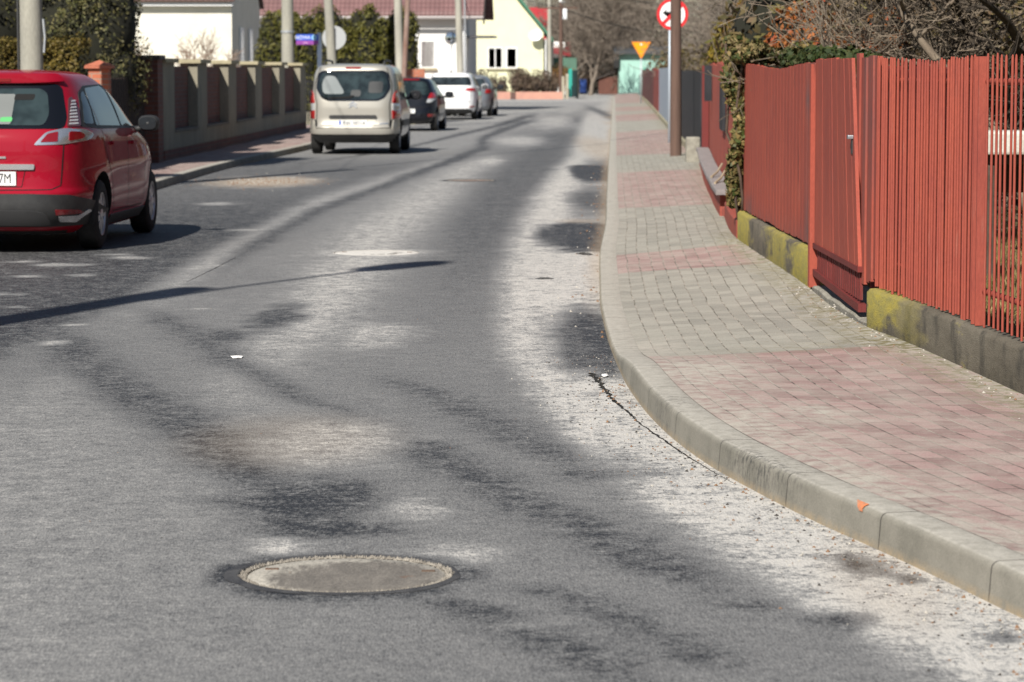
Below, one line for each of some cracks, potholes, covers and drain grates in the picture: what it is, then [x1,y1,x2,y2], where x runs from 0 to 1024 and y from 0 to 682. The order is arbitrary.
manhole cover [224,554,461,595]
crack [588,373,735,484]
